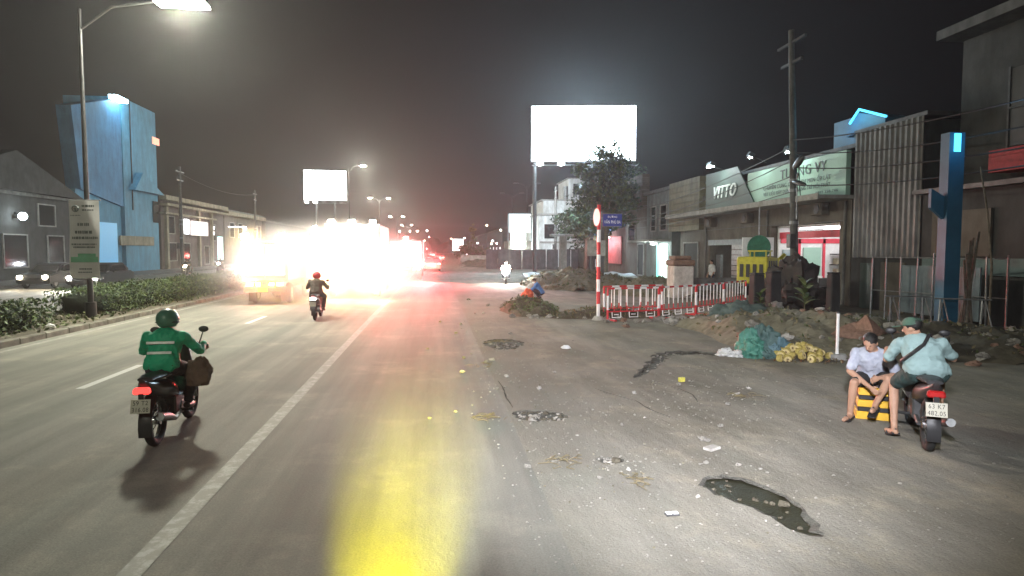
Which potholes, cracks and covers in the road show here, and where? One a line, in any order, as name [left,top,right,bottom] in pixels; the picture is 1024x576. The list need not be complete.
pothole [596,457,624,465]
crack [595,350,717,420]
pothole [698,474,825,537]
pothole [482,339,524,350]
pothole [512,410,569,422]
